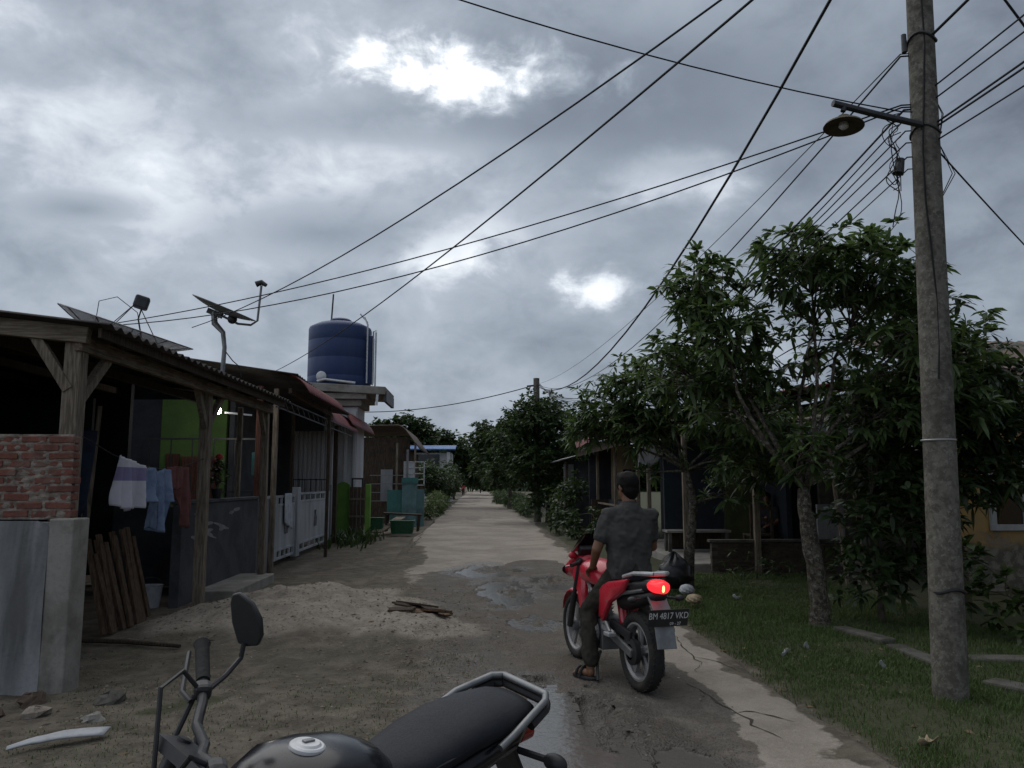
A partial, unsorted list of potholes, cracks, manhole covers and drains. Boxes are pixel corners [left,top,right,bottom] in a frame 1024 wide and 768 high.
pothole [454,563,526,579]
crack [676,636,790,737]
pothole [470,578,541,609]
pothole [503,615,563,634]
